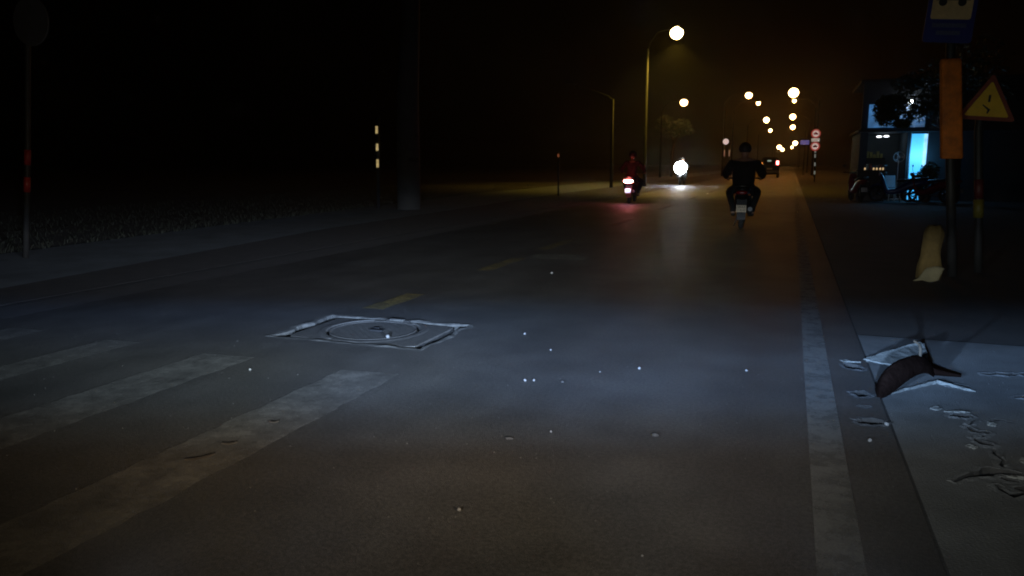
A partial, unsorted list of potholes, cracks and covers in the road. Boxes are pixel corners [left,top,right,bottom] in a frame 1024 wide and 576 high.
crack [943,394,1024,501]
crack [943,371,1024,390]
manhole cover [266,314,474,350]
